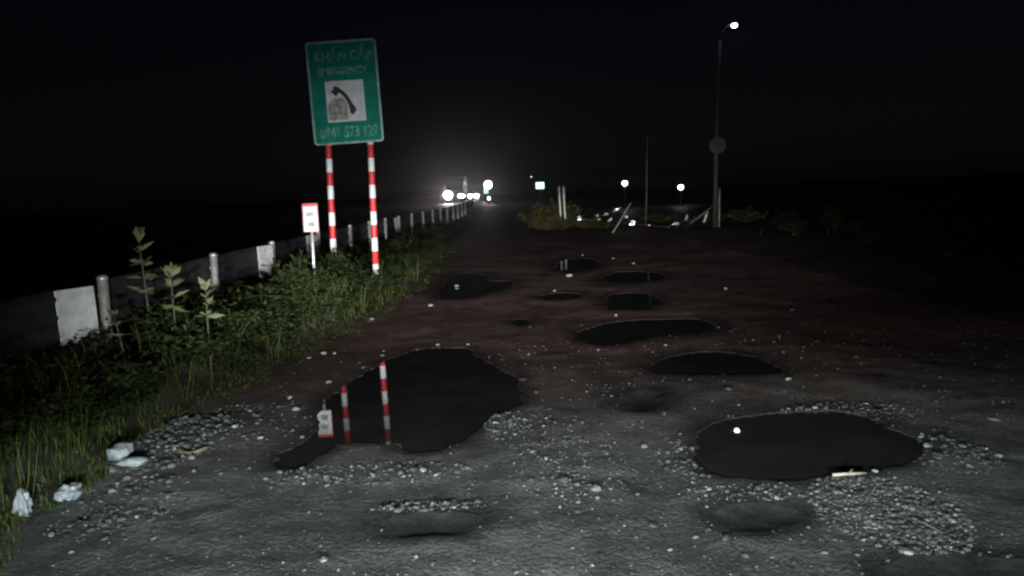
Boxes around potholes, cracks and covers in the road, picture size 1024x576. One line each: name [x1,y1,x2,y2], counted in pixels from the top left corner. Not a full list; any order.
pothole [575,318,720,345]
pothole [711,502,806,532]
pothole [616,389,666,412]
pothole [511,318,531,326]
pothole [603,293,664,310]
pothole [379,512,484,538]
pothole [436,272,514,300]
pothole [601,271,666,283]
pothole [537,292,585,300]
pothole [553,257,601,272]
pothole [693,410,926,481]
pothole [647,351,785,375]
